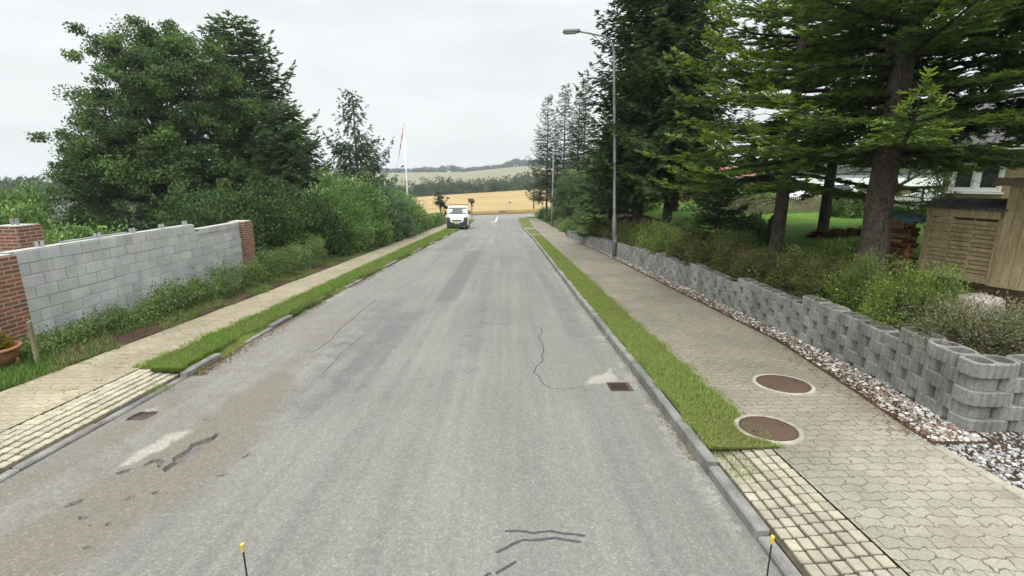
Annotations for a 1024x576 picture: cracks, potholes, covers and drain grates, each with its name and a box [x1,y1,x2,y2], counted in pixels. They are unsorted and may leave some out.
drain grate [606,382,634,391]
crack [534,326,587,390]
manhole cover [752,374,816,395]
manhole cover [733,414,805,445]
